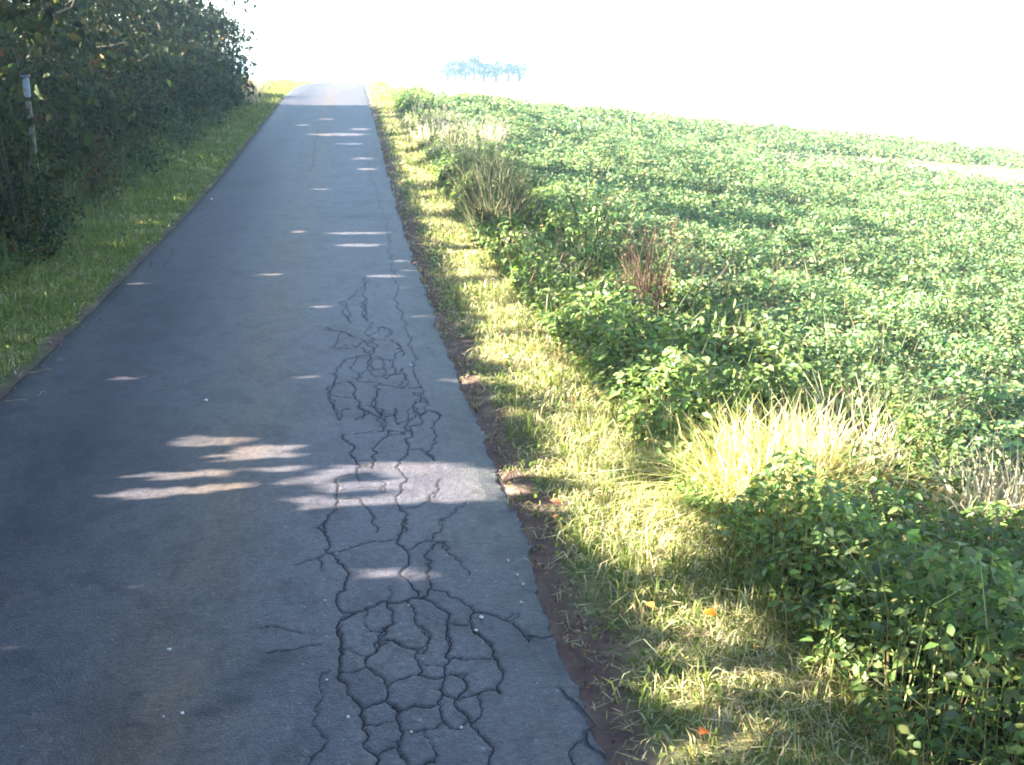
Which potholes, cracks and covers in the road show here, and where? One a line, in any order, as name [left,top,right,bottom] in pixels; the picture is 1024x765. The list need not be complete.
crack [366,154,419,384]
crack [560,688,610,765]
crack [262,276,556,765]
